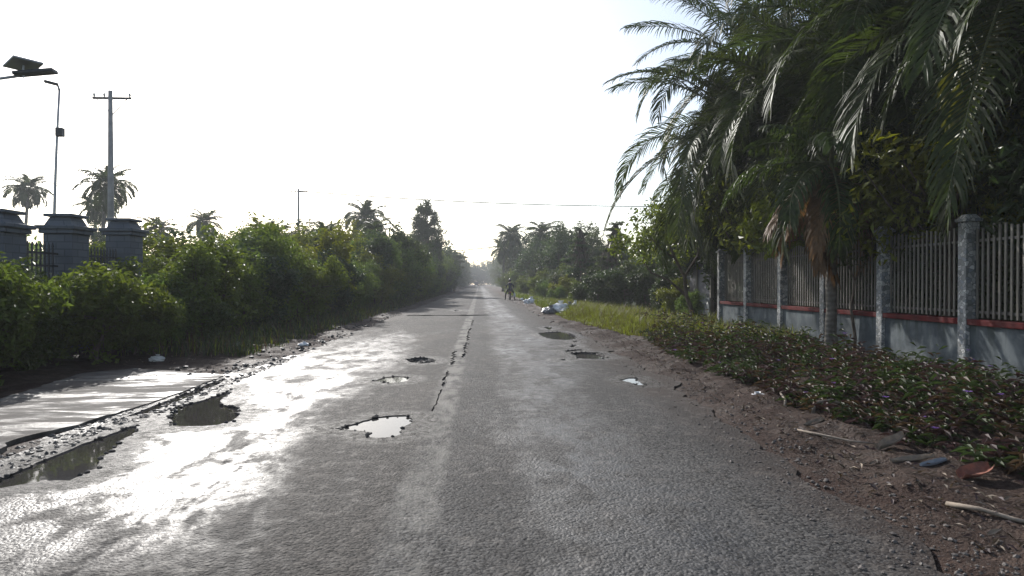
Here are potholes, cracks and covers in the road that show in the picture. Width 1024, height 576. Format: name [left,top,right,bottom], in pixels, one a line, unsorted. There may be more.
pothole [166,388,241,426]
pothole [571,351,611,359]
pothole [407,356,436,364]
pothole [0,423,140,488]
pothole [332,414,413,438]
pothole [539,331,578,340]
crack [407,315,479,411]
pothole [372,375,409,383]
pothole [127,378,227,417]
